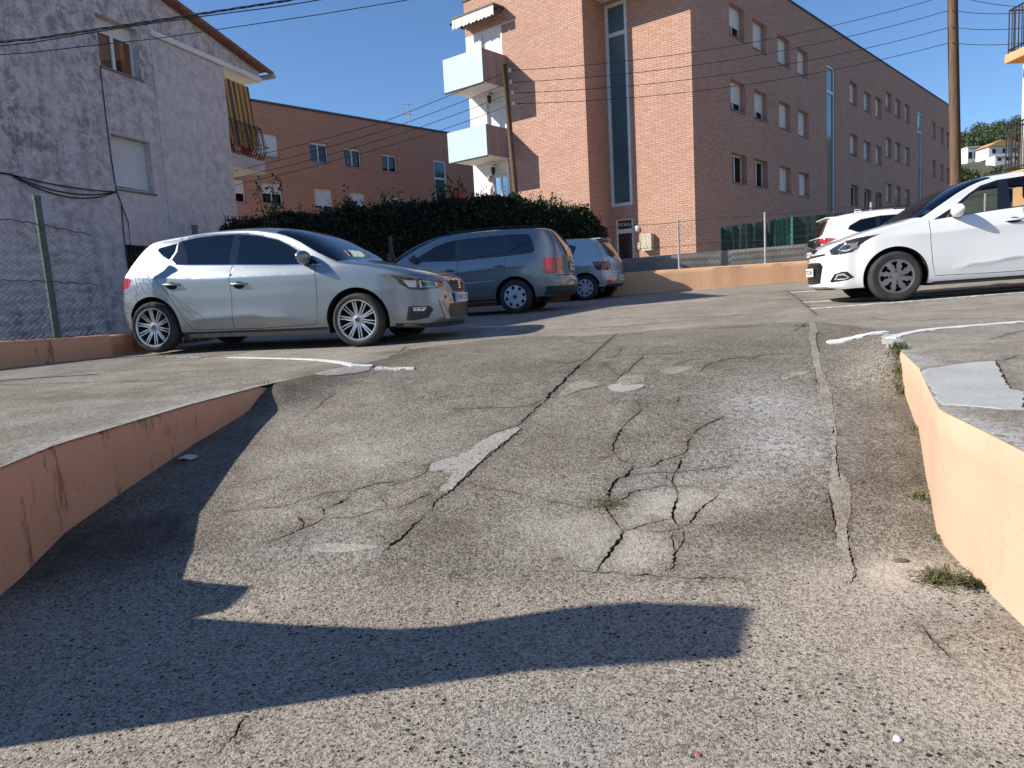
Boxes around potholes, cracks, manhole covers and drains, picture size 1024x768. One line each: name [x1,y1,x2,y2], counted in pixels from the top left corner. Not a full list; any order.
crack [228,313,857,584]
crack [921,625,963,665]
